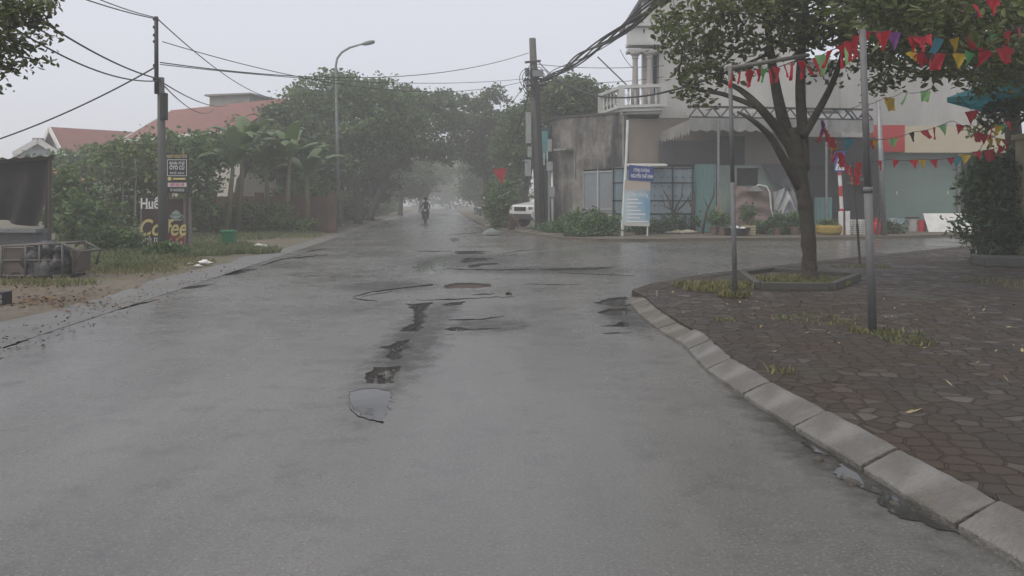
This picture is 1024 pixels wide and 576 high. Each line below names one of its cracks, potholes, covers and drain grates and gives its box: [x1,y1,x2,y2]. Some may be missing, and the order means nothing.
pothole [348,388,393,420]
pothole [364,366,401,384]
pothole [400,302,434,332]
pothole [597,308,632,316]
pothole [380,340,411,360]
pothole [594,296,629,306]
crack [354,233,635,301]
